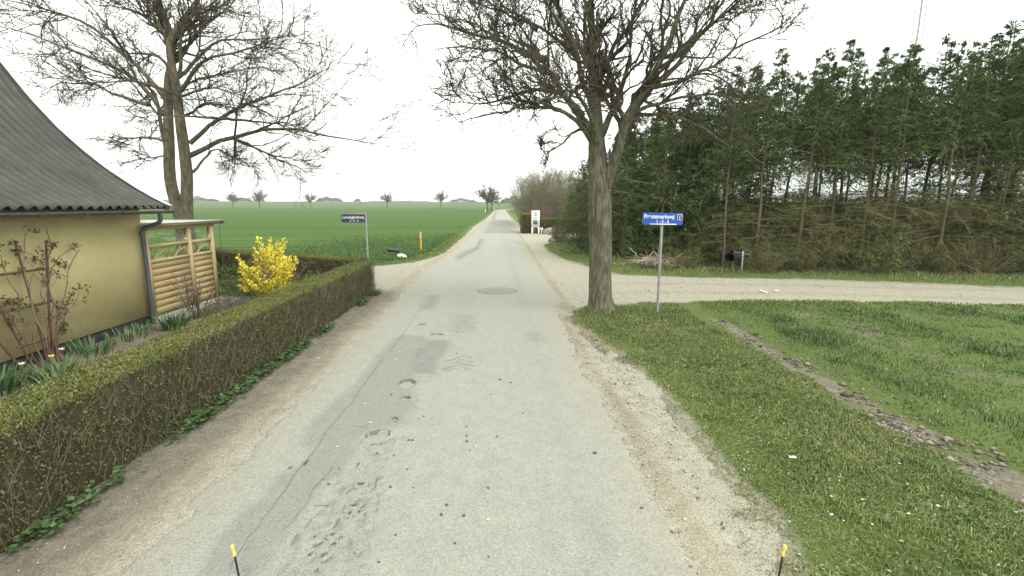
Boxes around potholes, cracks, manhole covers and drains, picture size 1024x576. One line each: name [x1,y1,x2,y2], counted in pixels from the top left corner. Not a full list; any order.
crack [277,462,380,571]
